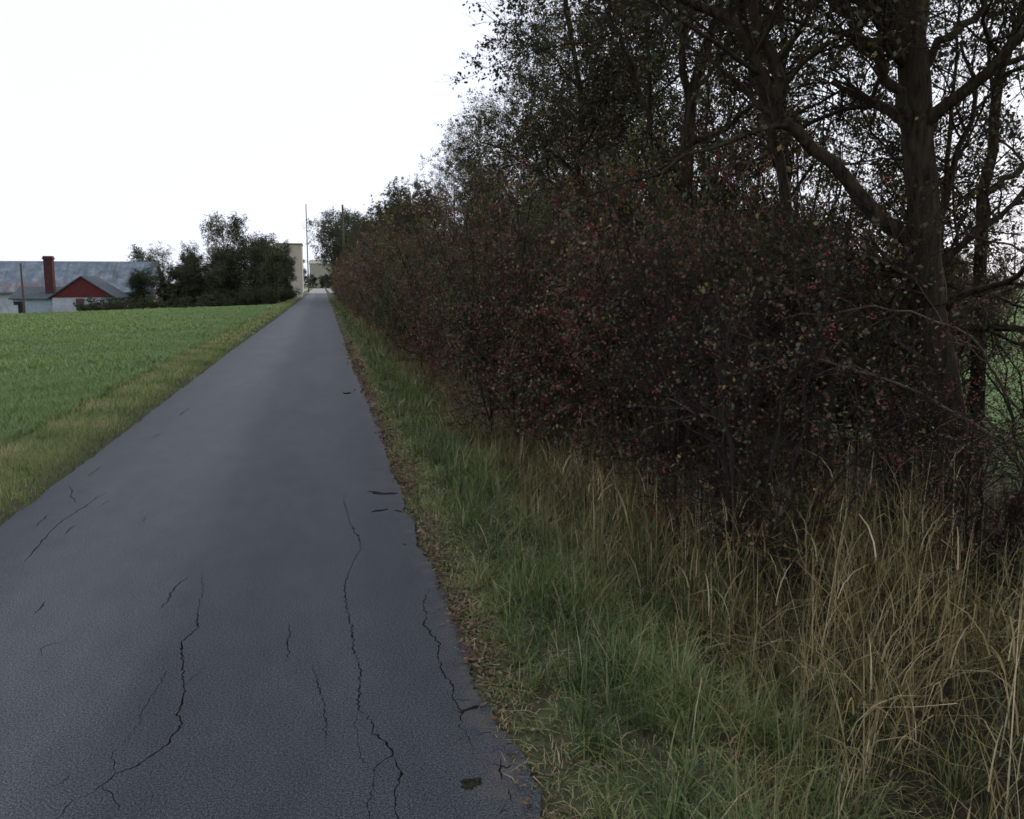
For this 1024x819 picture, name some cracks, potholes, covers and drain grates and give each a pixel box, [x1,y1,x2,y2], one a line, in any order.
crack [54,575,204,819]
crack [343,491,403,819]
crack [422,589,492,755]
crack [312,665,327,740]
crack [26,466,105,560]
pothole [459,778,482,790]
